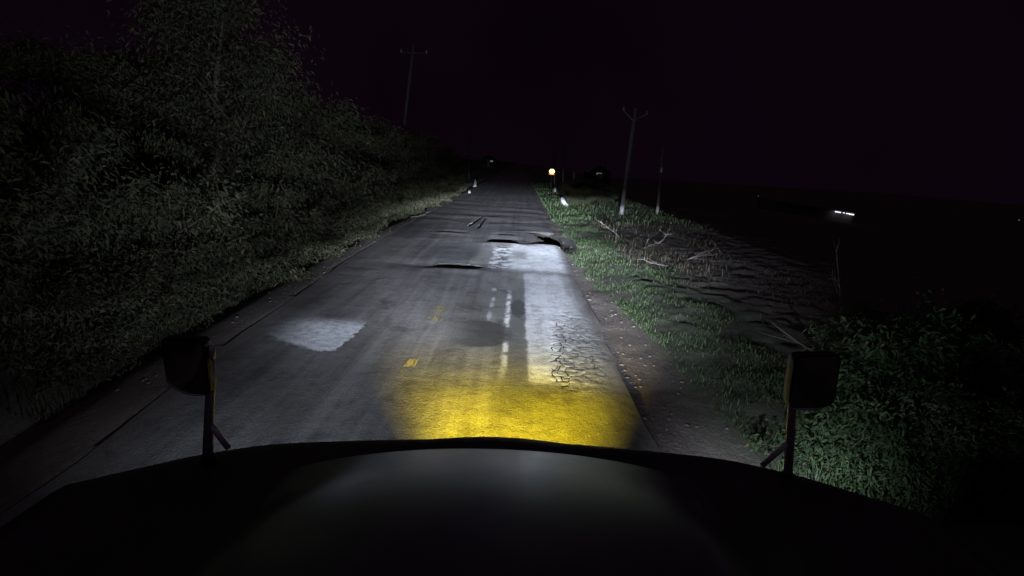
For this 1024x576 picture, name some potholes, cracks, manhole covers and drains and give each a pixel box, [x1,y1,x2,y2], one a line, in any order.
crack [469,215,487,229]
crack [551,313,606,391]
